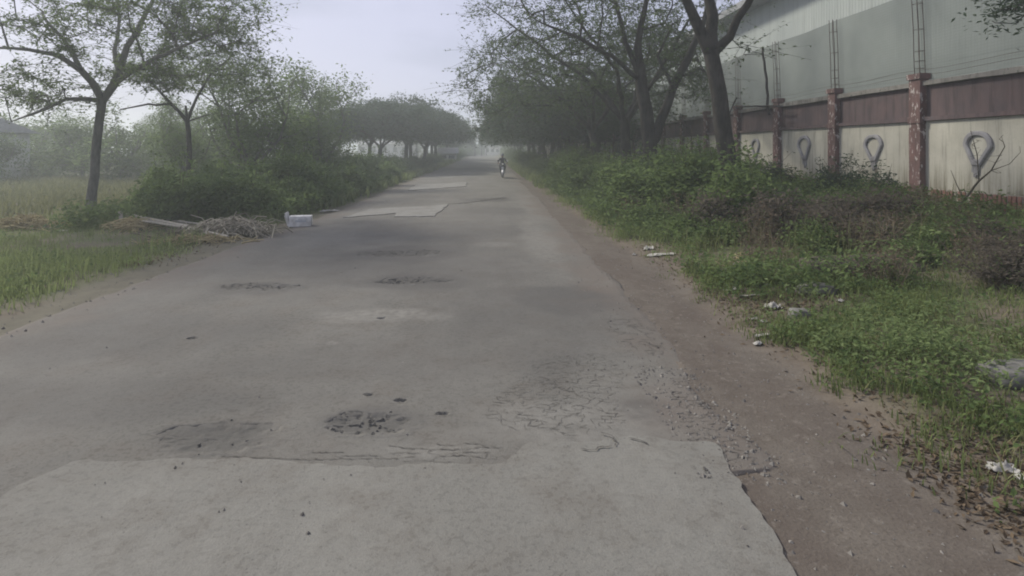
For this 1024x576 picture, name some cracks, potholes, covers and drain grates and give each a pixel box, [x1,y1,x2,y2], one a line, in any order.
crack [236,442,501,462]
pothole [316,408,428,438]
crack [486,353,648,450]
pothole [342,249,458,258]
pothole [364,276,472,286]
pothole [210,282,311,291]
